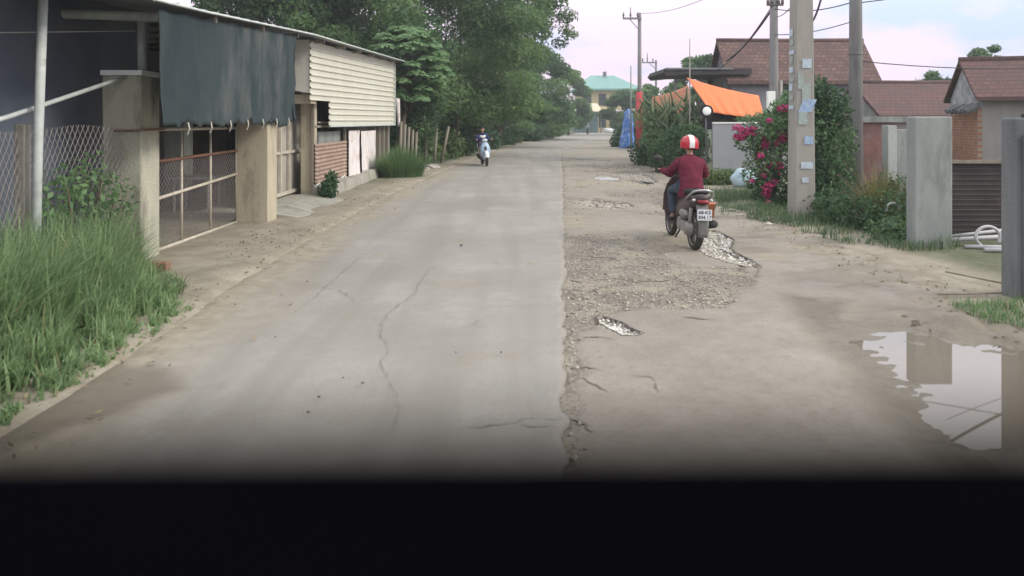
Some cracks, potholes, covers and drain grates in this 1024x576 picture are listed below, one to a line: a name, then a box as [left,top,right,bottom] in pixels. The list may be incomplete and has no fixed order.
pothole [572,198,637,210]
pothole [590,171,660,186]
pothole [594,316,644,336]
crack [567,366,607,391]
crack [380,271,555,425]
pothole [699,230,762,268]
